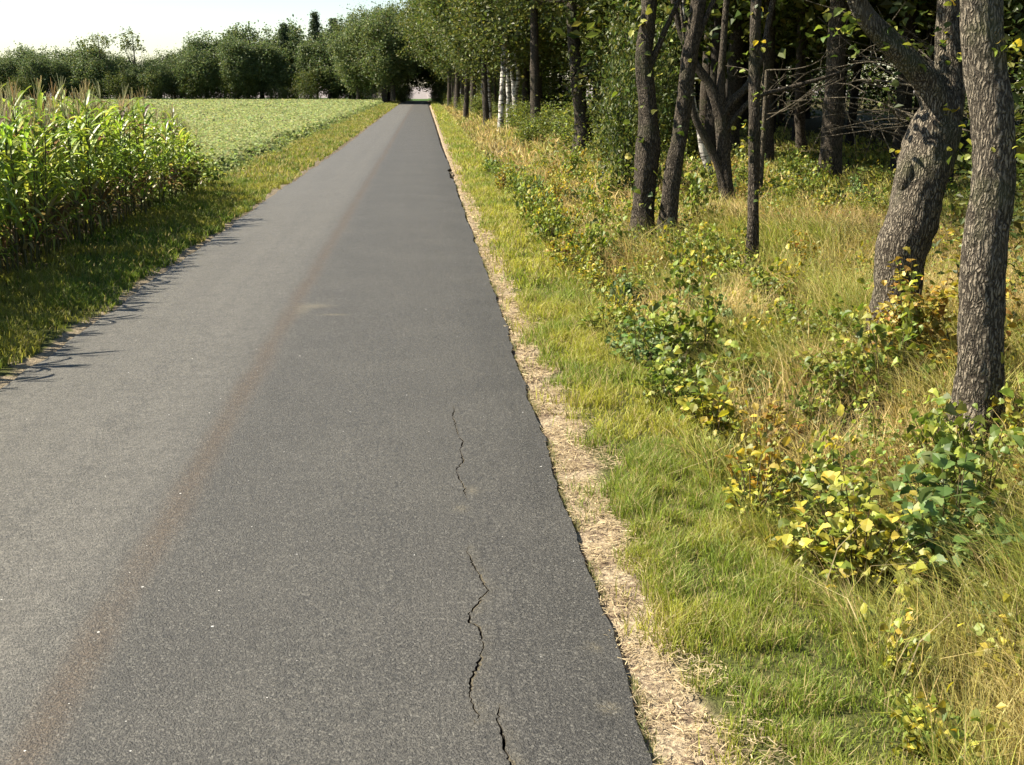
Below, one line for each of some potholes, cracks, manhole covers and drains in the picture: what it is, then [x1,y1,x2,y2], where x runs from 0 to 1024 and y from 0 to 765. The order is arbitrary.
crack [466,546,516,765]
crack [452,408,468,500]
